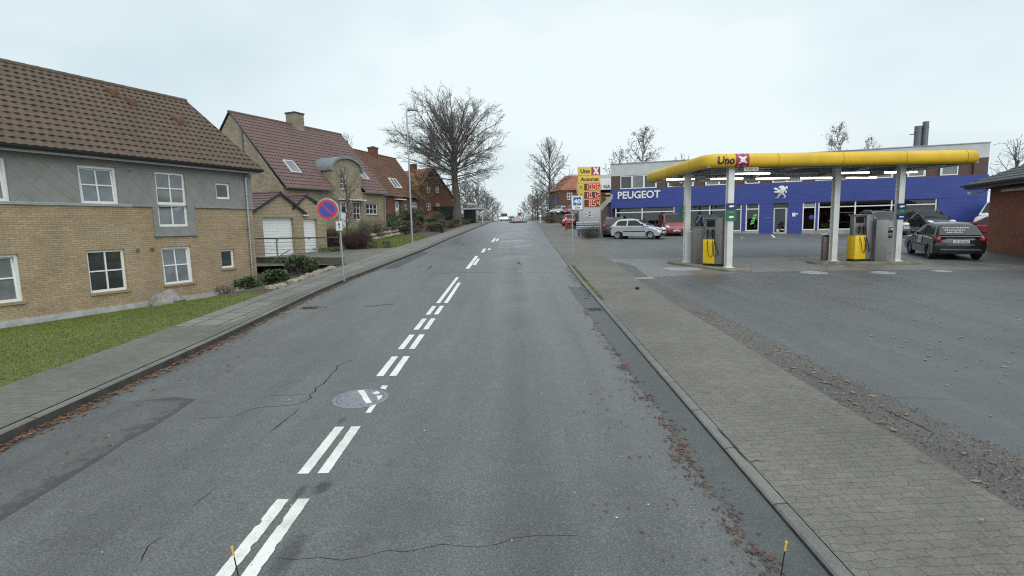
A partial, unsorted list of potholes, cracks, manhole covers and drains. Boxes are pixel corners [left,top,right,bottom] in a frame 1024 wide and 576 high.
crack [274,535,589,561]
crack [885,397,964,433]
crack [198,358,358,432]
manhole cover [332,389,388,408]
crack [140,487,216,563]
